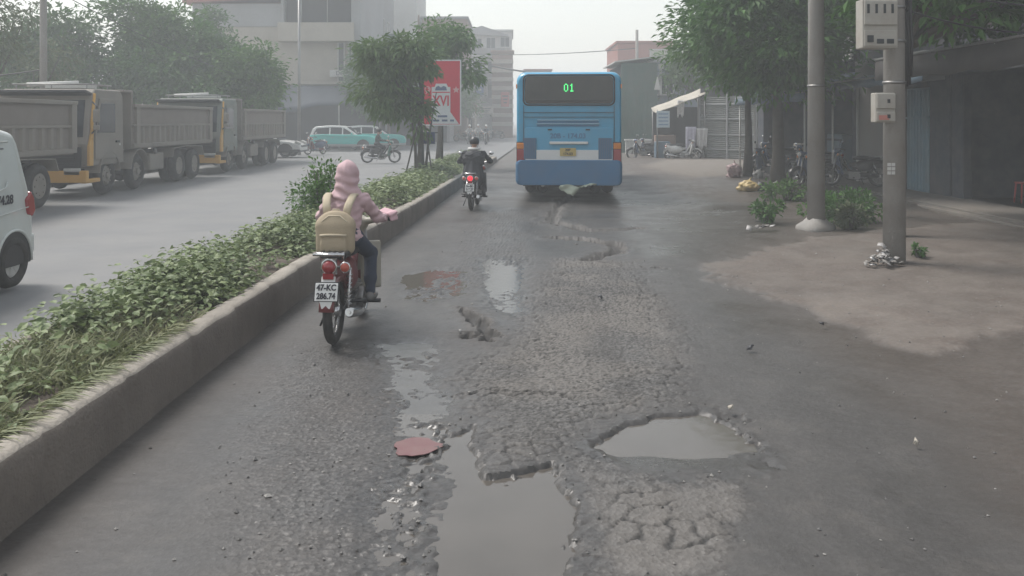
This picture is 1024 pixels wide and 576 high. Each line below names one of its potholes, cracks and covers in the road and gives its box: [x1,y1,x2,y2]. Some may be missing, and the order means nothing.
pothole [583,407,772,477]
pothole [368,414,592,576]
pothole [457,307,503,342]
crack [432,195,761,576]
